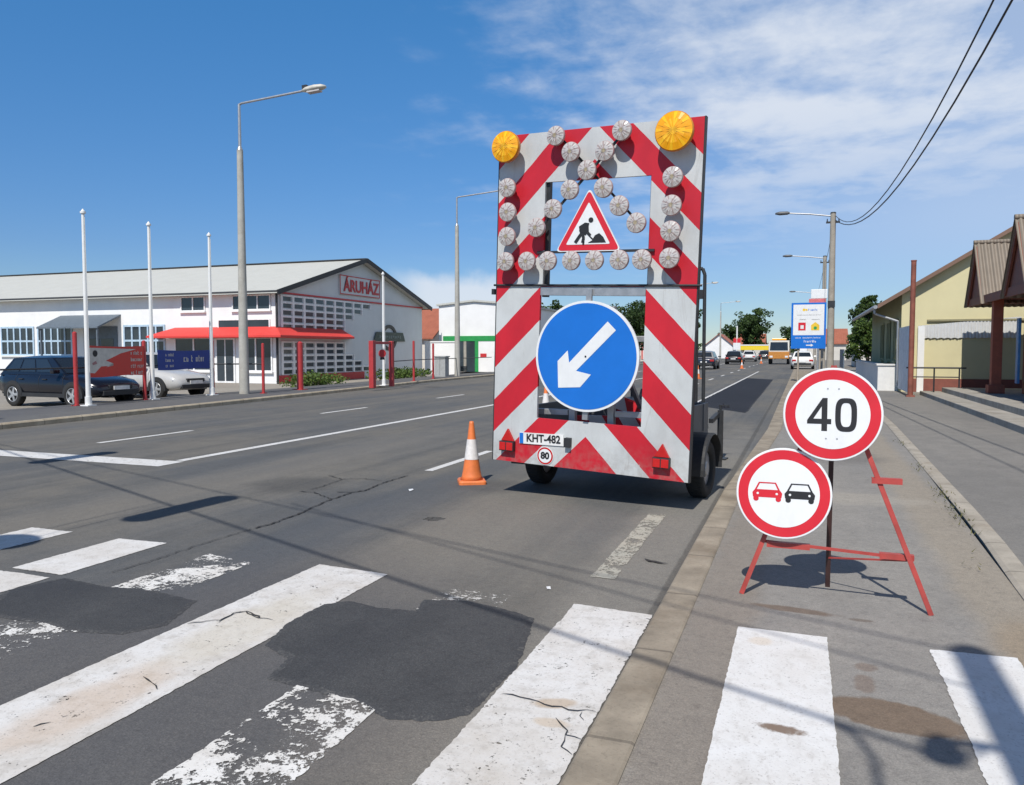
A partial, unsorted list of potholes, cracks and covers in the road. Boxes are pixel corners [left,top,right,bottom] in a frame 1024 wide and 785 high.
crack [503,693,593,753]
crack [118,475,408,570]
crack [190,611,273,623]
